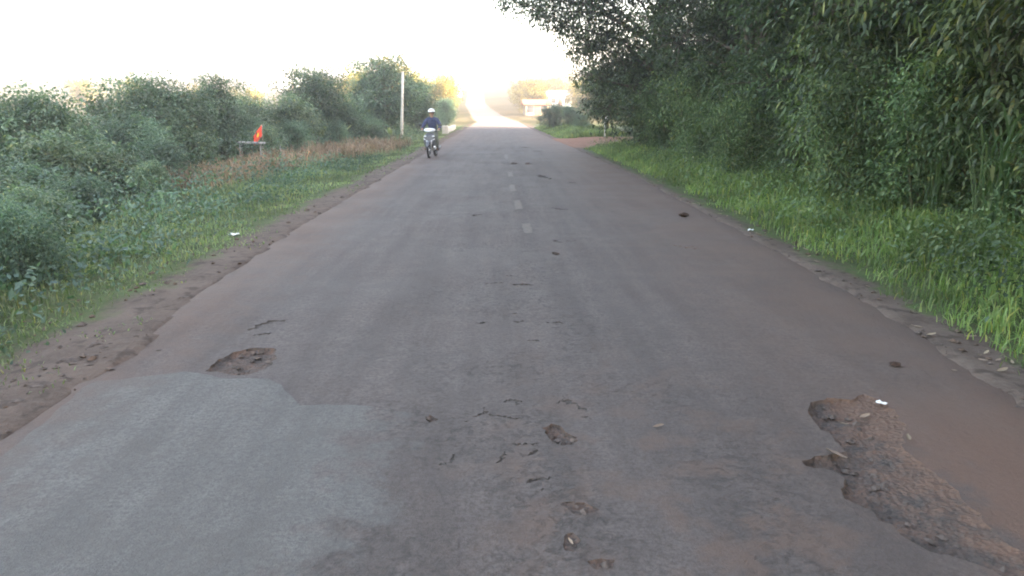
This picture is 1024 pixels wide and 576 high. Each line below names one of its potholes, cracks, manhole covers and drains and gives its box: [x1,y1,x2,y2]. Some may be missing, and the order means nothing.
pothole [561,502,599,515]
pothole [587,558,614,570]
crack [247,319,289,336]
crack [464,398,524,422]
crack [494,442,539,464]
pothole [563,532,581,552]
pothole [802,394,1024,576]
crack [558,395,591,419]
pothole [543,423,577,445]
crack [527,476,553,490]
pothole [206,348,277,375]
